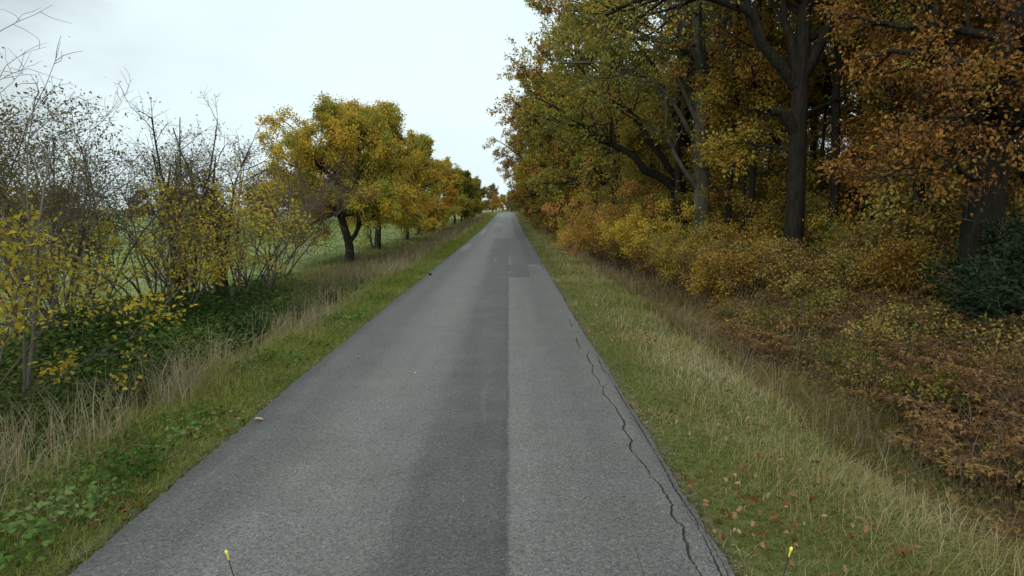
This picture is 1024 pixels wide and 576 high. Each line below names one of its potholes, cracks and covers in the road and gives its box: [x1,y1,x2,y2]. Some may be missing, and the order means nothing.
crack [559,305,729,576]
